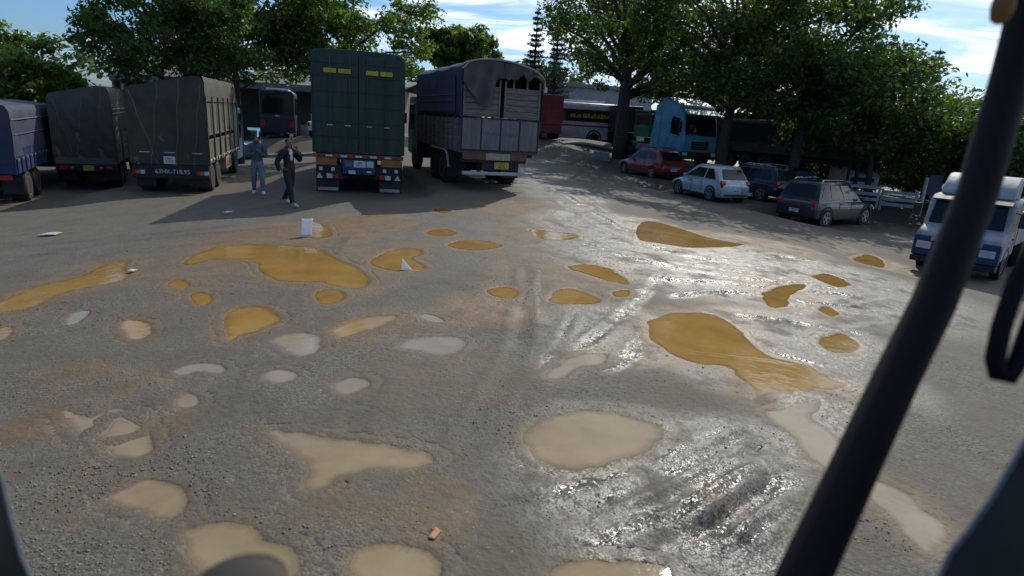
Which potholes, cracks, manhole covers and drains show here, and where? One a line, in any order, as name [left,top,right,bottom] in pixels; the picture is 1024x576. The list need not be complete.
pothole [441,239,510,252]
pothole [637,309,861,412]
pothole [538,286,611,307]
pothole [384,332,477,361]
pothole [0,259,140,316]
pothole [209,303,292,345]
pothole [258,328,333,361]
pothole [629,220,750,249]
pothole [508,403,681,479]
pothole [325,527,468,576]
pothole [362,247,436,274]
pothole [753,282,814,310]
